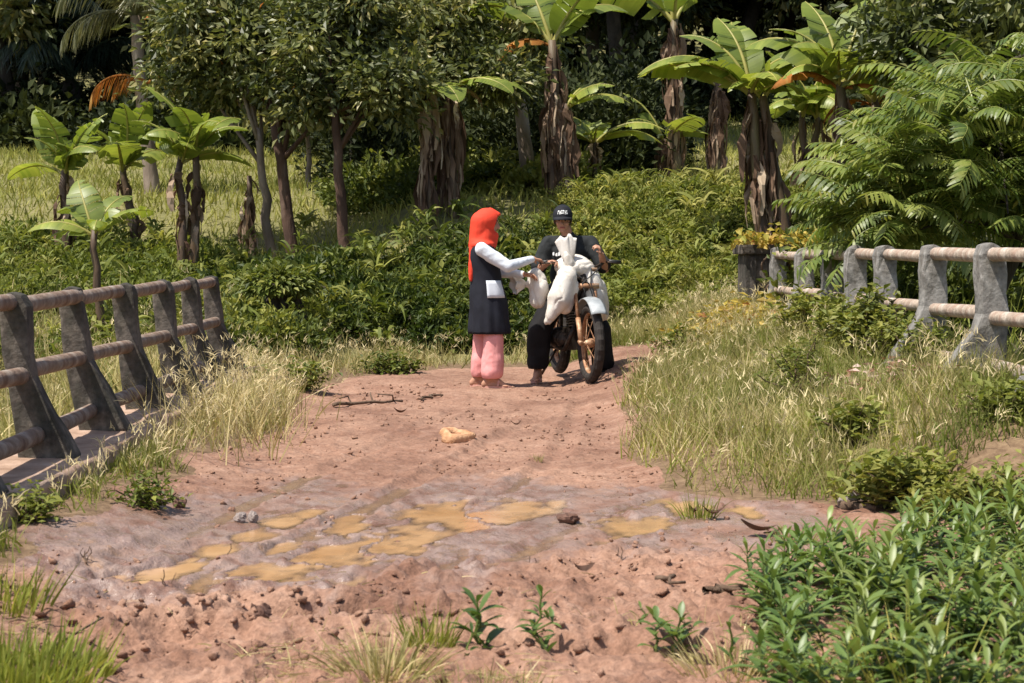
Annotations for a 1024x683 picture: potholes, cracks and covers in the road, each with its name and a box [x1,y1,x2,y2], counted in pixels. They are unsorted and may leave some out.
pothole [482,487,589,526]
pothole [110,508,330,591]
pothole [579,509,687,542]
pothole [376,493,502,559]
pothole [267,529,417,576]
pothole [319,514,376,542]
